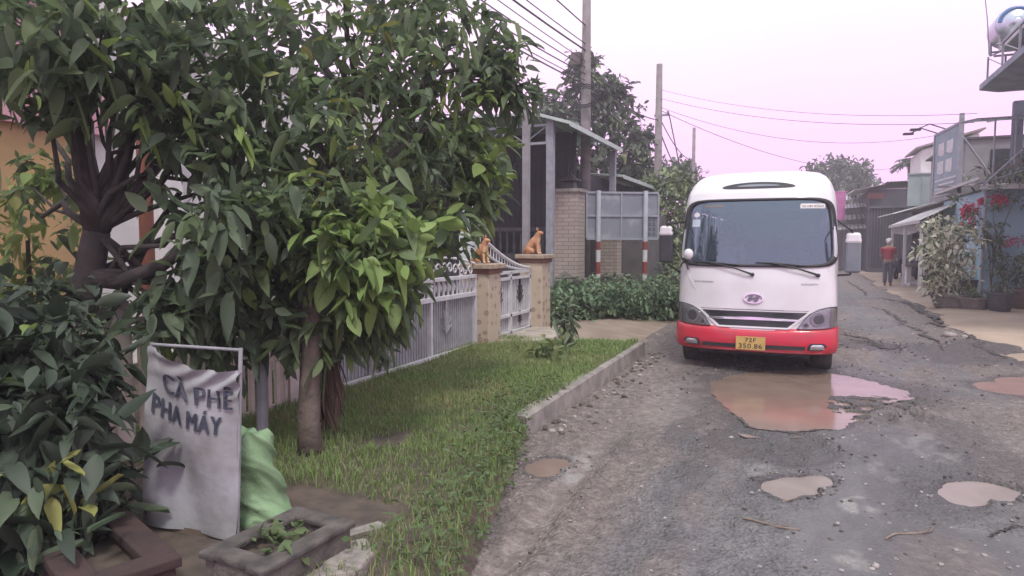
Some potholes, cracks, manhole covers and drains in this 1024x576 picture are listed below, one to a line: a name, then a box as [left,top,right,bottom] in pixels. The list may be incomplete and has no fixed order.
pothole [518,456,575,479]
pothole [926,477,1024,510]
pothole [692,365,942,439]
crack [839,281,1007,359]
pothole [752,472,839,502]
pothole [961,375,1024,398]
crack [987,524,1024,537]
